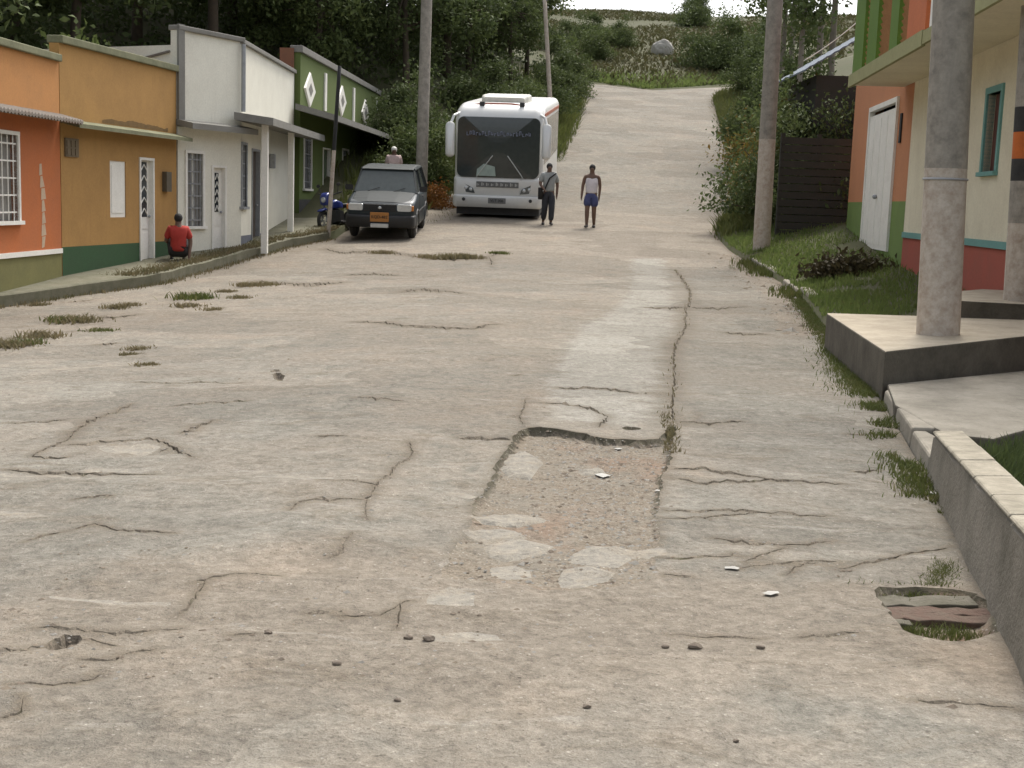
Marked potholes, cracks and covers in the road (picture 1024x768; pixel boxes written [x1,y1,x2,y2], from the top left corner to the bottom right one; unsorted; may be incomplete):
crack [289,442,413,559]
crack [305,600,409,629]
crack [0,573,278,719]
pothole [44,634,82,650]
crack [676,466,876,485]
crack [14,404,212,459]
crack [663,537,946,578]
crack [27,523,176,541]
crack [72,300,136,346]
pothole [440,424,676,592]
pothole [874,587,999,641]
crack [260,249,496,294]
